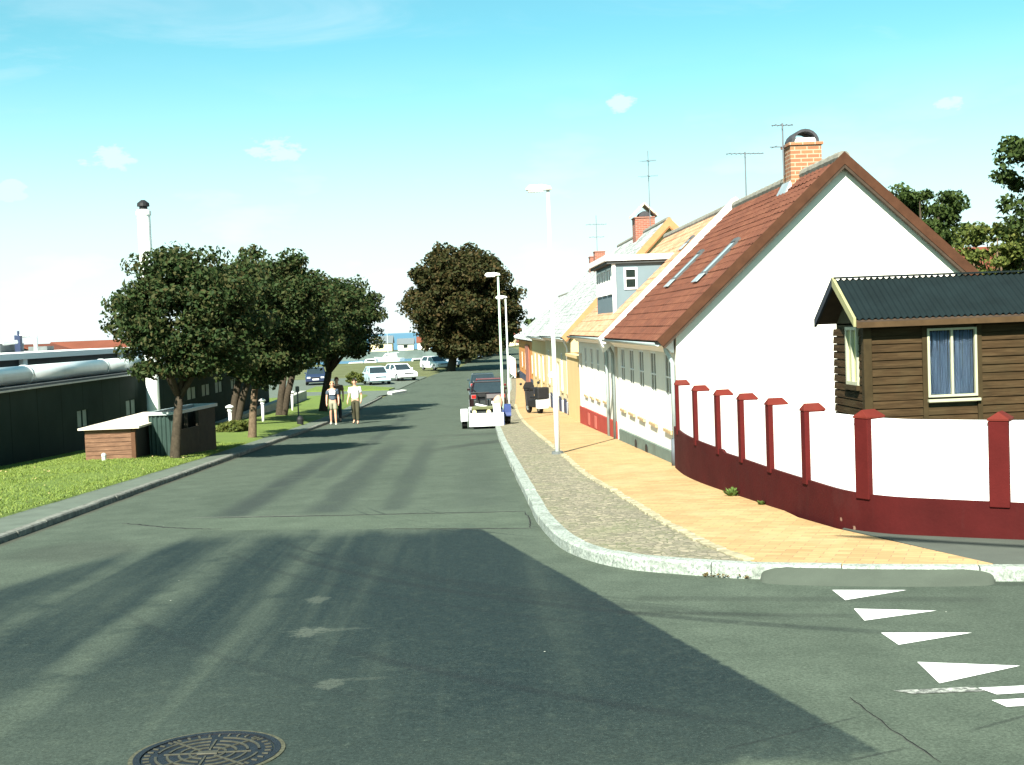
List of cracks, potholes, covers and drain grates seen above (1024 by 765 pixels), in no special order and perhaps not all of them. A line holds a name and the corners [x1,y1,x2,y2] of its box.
crack [850,697,940,762]
manhole cover [128,730,285,765]
